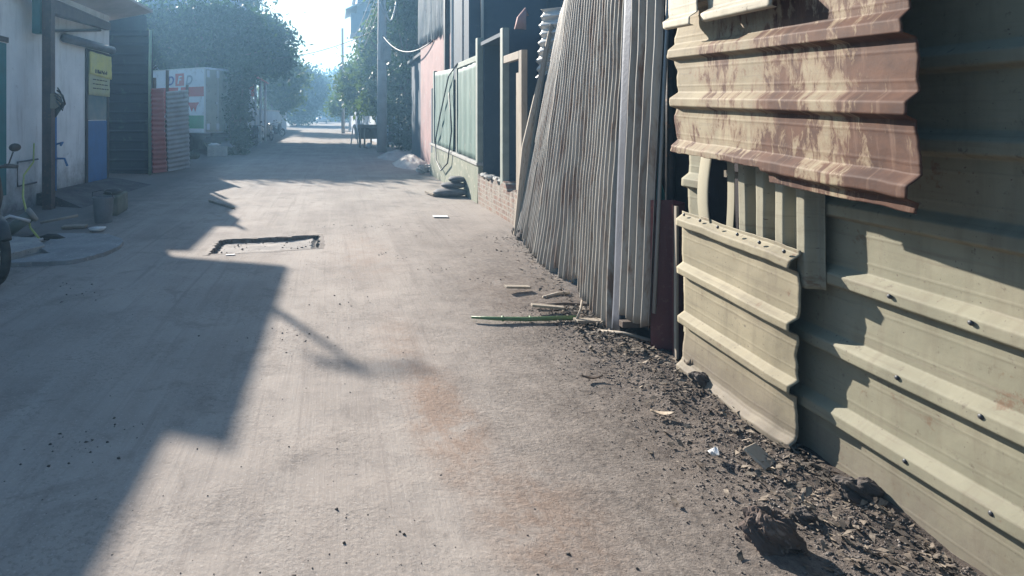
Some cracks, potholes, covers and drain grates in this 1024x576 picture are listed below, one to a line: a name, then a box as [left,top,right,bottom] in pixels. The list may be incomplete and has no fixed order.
pothole [203,234,325,256]
